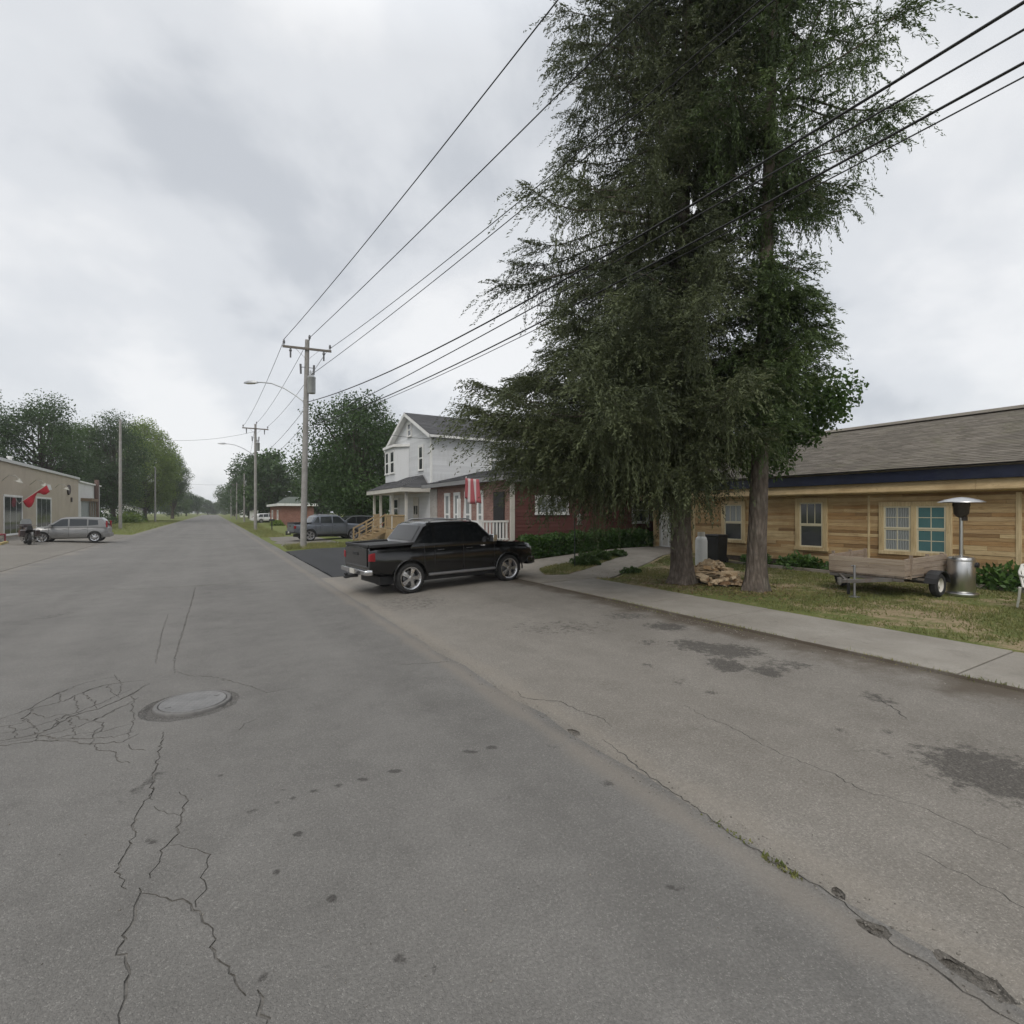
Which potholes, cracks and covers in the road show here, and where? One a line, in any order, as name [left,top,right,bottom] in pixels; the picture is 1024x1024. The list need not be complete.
manhole cover [152,690,232,718]
crack [684,705,1024,855]
pothole [831,887,846,900]
crack [602,739,1019,1024]
crack [155,587,299,693]
pothole [855,919,892,940]
crack [517,691,612,727]
crack [0,675,271,1024]
pothole [932,949,1021,1005]
